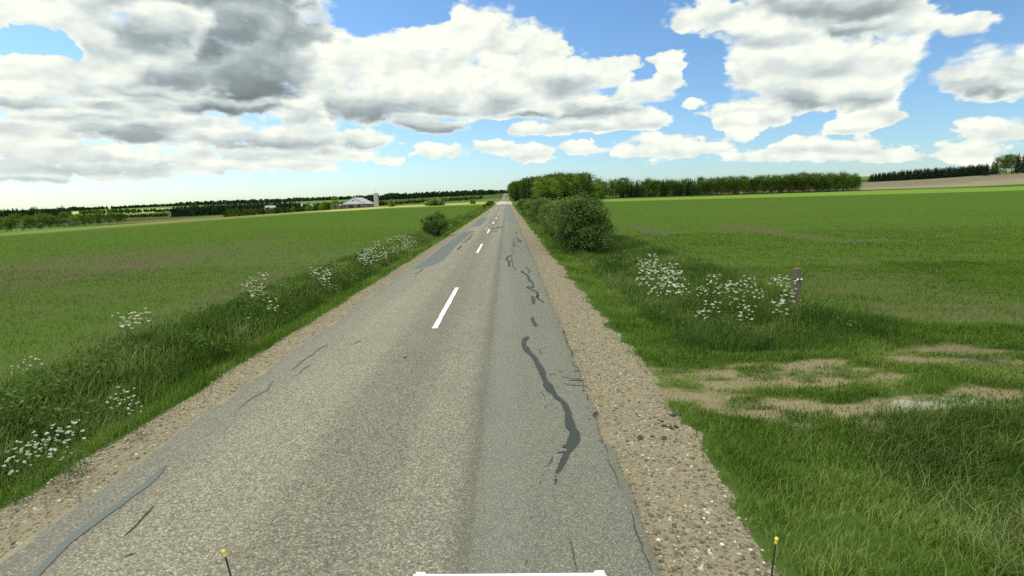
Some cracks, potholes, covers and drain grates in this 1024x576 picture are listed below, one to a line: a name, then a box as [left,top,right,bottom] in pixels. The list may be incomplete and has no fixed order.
crack [240,345,326,408]
crack [123,506,153,556]
crack [599,438,652,572]
